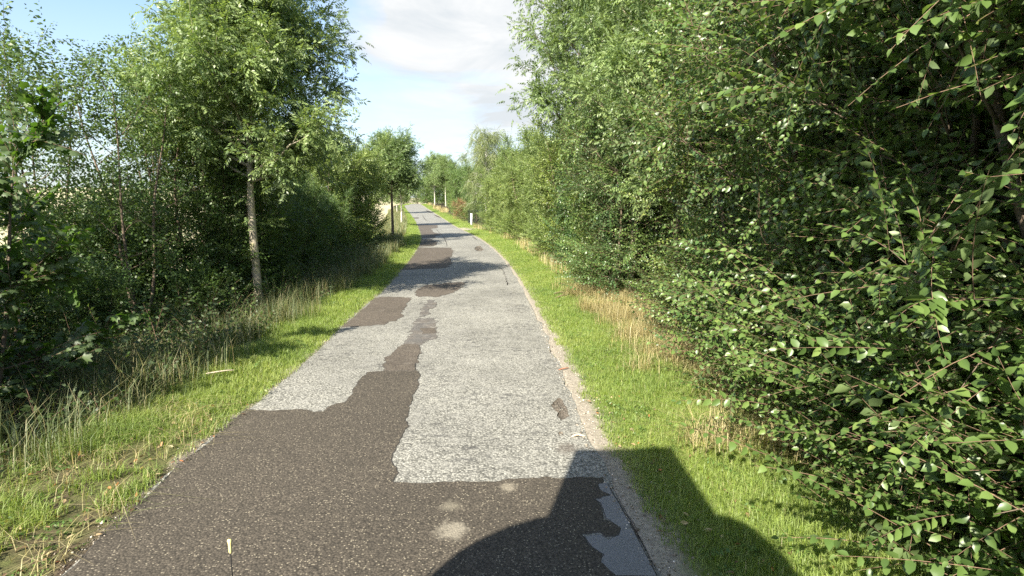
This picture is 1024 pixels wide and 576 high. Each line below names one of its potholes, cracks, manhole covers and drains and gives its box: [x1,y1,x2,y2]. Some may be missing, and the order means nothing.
pothole [551,398,569,420]
